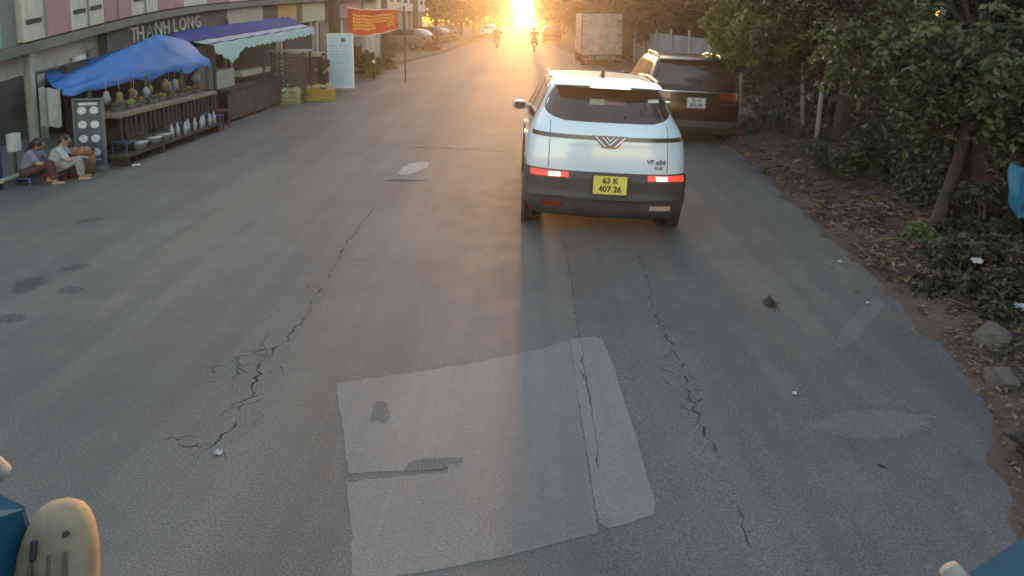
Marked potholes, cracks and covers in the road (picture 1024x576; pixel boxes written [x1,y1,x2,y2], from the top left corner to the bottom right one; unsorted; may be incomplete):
crack [557,227,599,467]
crack [637,250,749,545]
crack [161,204,376,463]
